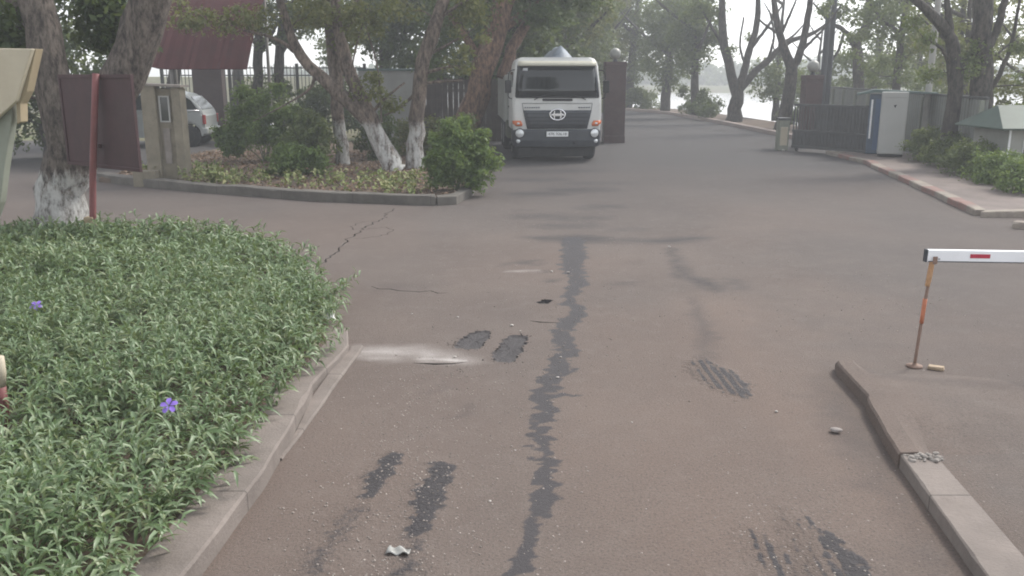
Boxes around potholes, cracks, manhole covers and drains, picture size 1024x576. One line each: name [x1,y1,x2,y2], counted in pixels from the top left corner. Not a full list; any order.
pothole [437,330,491,350]
pothole [482,333,531,364]
crack [324,208,395,263]
